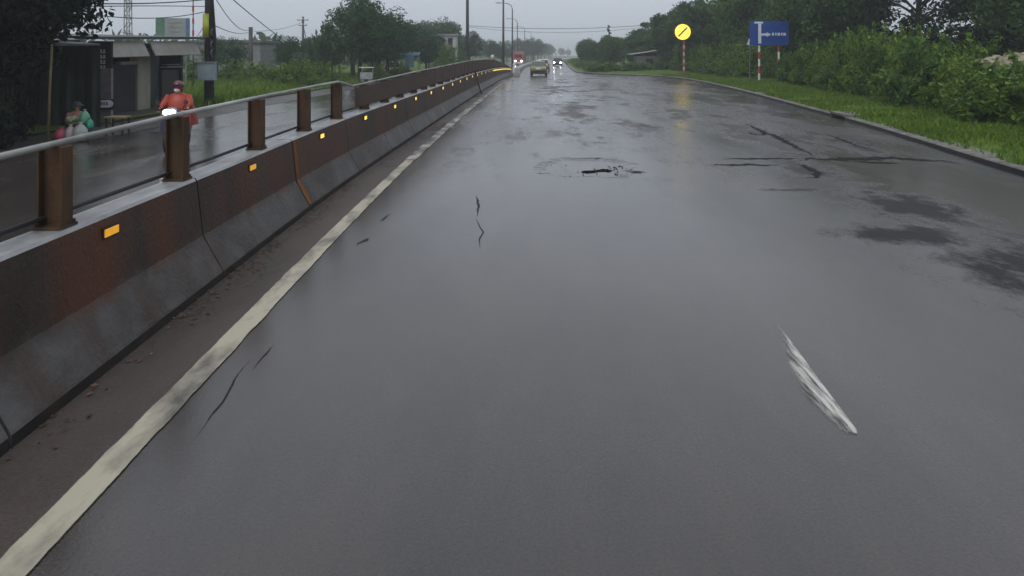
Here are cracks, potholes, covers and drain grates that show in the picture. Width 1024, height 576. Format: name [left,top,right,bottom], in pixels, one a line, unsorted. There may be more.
crack [714,124,959,178]
pothole [533,157,646,178]
crack [476,197,484,243]
crack [197,349,270,435]
